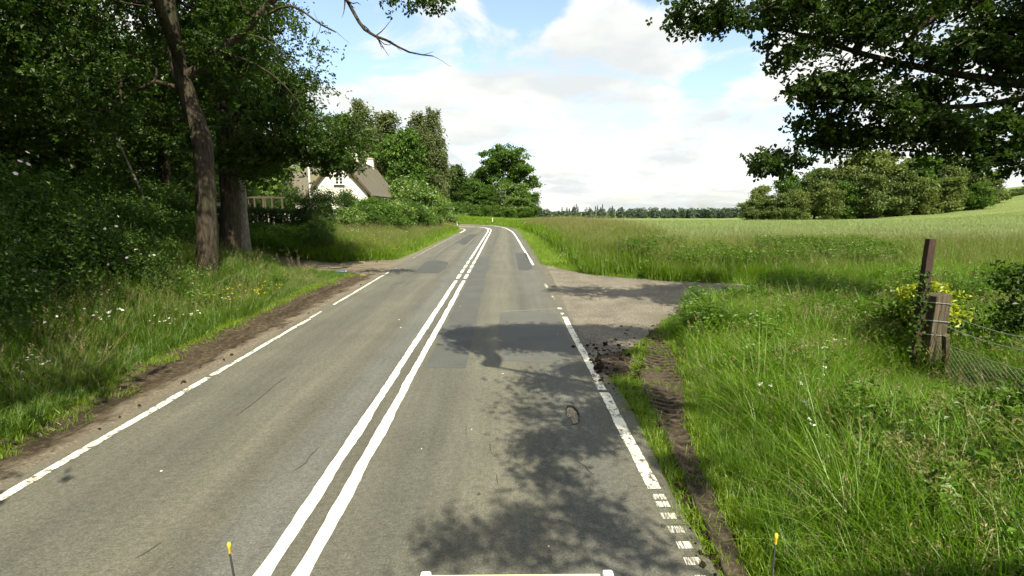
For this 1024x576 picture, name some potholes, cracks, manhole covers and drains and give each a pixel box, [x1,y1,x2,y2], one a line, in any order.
pothole [566,405,580,425]
